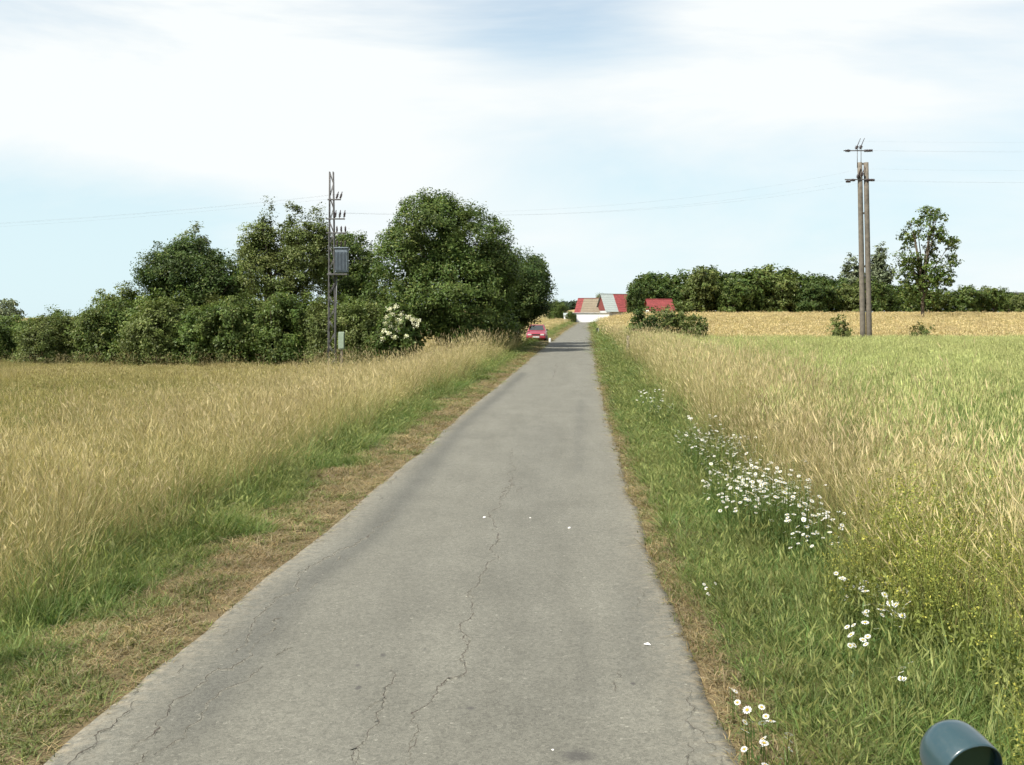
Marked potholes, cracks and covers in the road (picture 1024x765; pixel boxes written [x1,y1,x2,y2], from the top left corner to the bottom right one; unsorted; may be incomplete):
crack [683,685,725,765]
crack [67,443,522,765]
